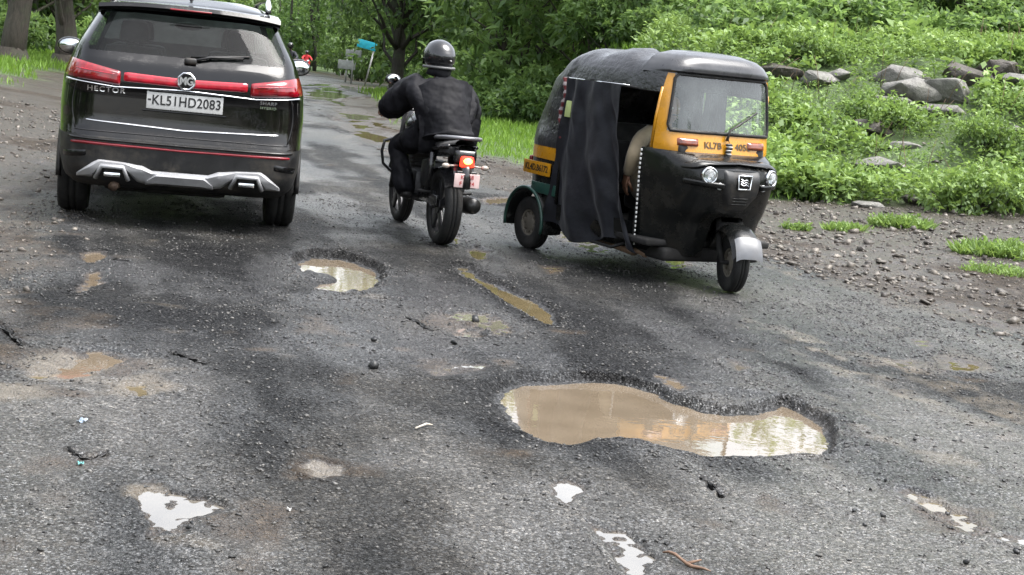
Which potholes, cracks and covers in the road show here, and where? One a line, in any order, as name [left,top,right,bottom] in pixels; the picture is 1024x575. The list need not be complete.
crack [67,446,107,460]
pothole [885,483,1003,541]
pothole [122,473,242,539]
pothole [284,247,393,293]
pothole [428,306,529,339]
pothole [11,344,152,383]
pothole [572,516,672,575]
pothole [285,453,362,482]
crack [0,325,23,346]
crack [405,316,435,331]
pothole [535,474,601,507]
